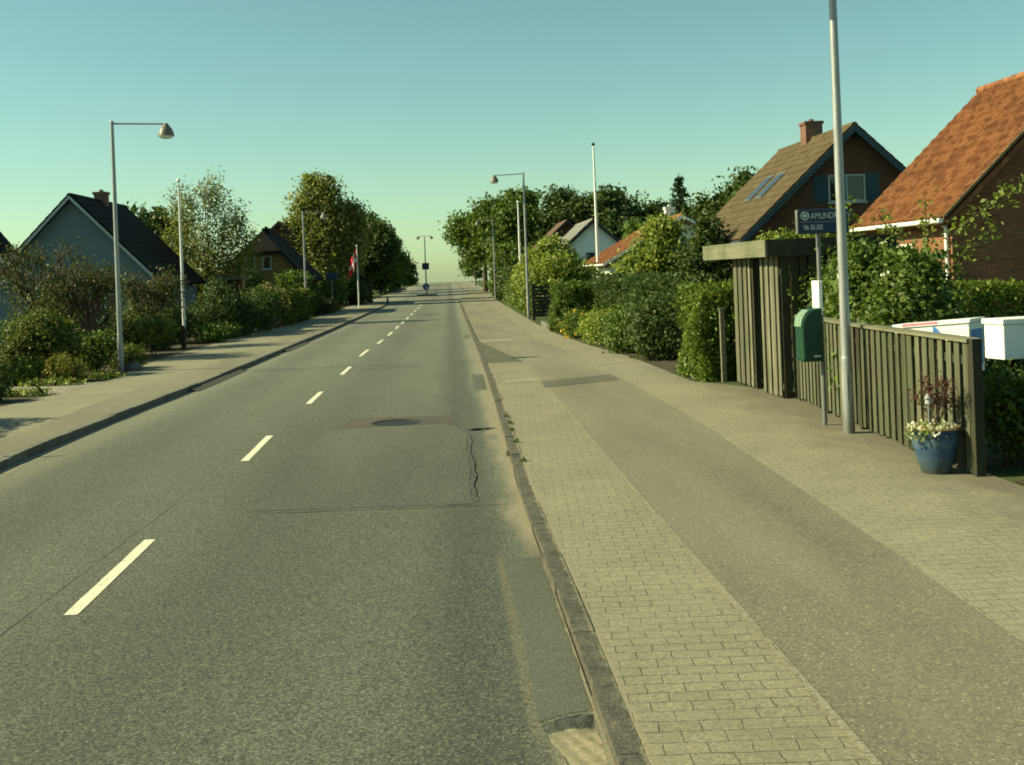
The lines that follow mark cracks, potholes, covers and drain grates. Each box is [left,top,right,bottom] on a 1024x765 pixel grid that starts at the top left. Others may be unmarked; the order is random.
crack [265,433,503,513]
